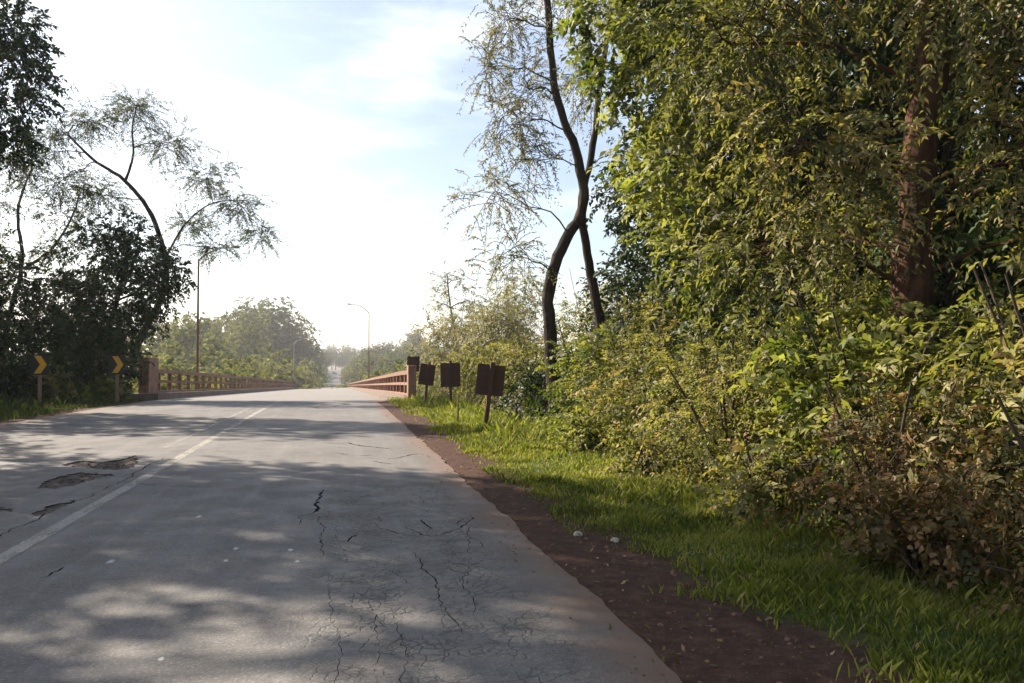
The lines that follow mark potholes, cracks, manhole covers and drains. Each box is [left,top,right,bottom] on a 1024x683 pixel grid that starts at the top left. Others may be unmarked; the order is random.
crack [298,479,487,683]
pothole [32,500,75,516]
pothole [61,455,140,470]
pothole [39,472,114,489]
crack [333,442,414,464]
